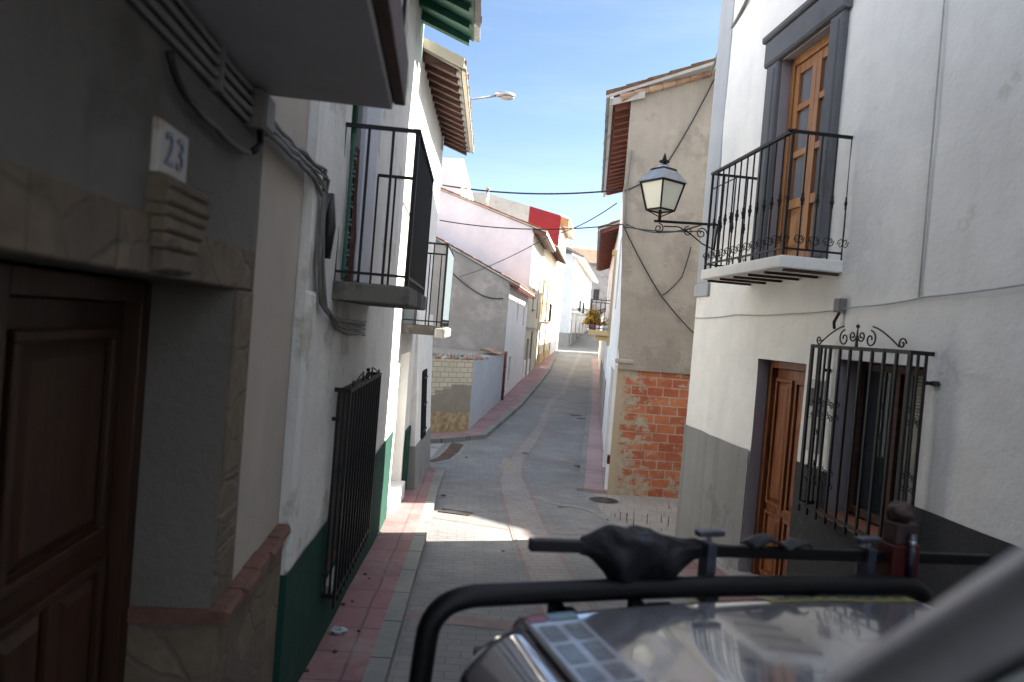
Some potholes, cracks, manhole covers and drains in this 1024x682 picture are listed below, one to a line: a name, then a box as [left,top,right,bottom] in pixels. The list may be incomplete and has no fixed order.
drain grate [438,508,473,516]
manhole cover [585,496,622,504]
